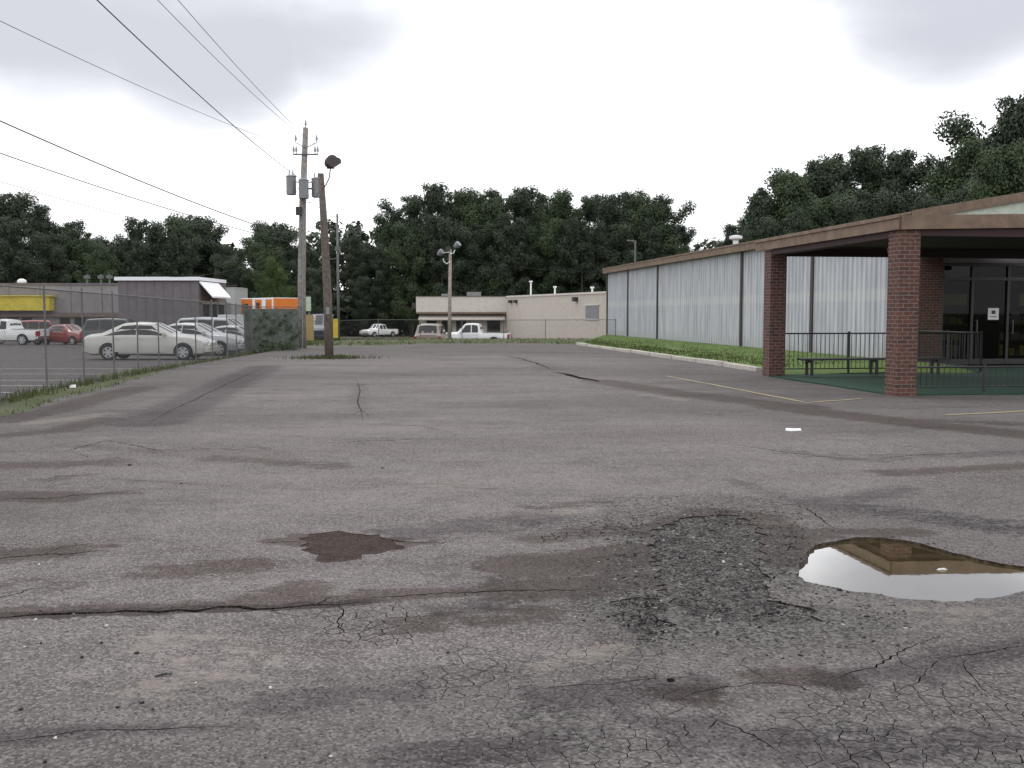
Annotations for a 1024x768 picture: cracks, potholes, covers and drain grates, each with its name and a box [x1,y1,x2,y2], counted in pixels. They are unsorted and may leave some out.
pothole [646,515,823,628]
crack [0,586,606,646]
crack [349,382,439,443]
crack [510,356,598,381]
crack [771,637,1024,768]
crack [4,726,230,742]
crack [0,542,106,559]
crack [416,621,834,768]
